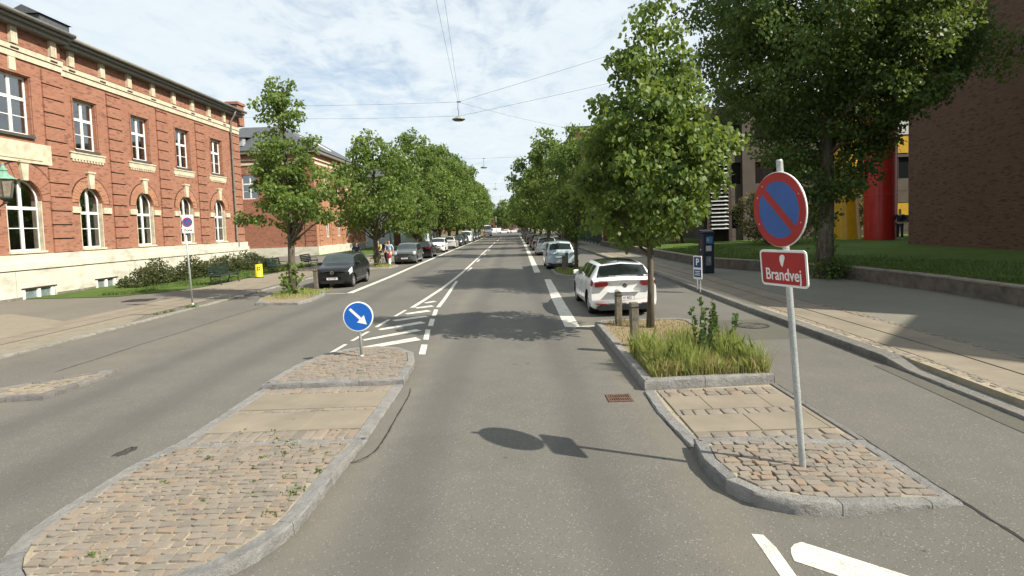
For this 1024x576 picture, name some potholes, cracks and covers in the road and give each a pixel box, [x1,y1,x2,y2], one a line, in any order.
drain grate [605,394,634,402]
